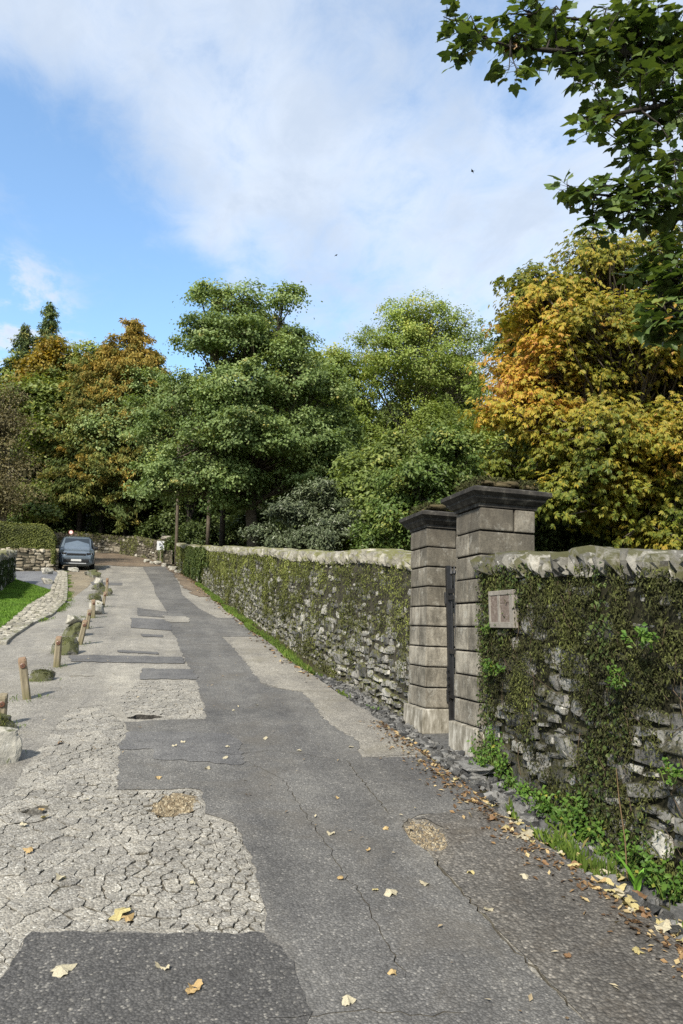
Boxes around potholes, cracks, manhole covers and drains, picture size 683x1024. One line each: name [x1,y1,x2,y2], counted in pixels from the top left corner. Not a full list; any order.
crack [0,681,331,977]
pothole [402,818,449,852]
crack [433,856,577,1013]
pothole [149,793,201,818]
crack [254,765,406,977]
pothole [6,807,58,825]
